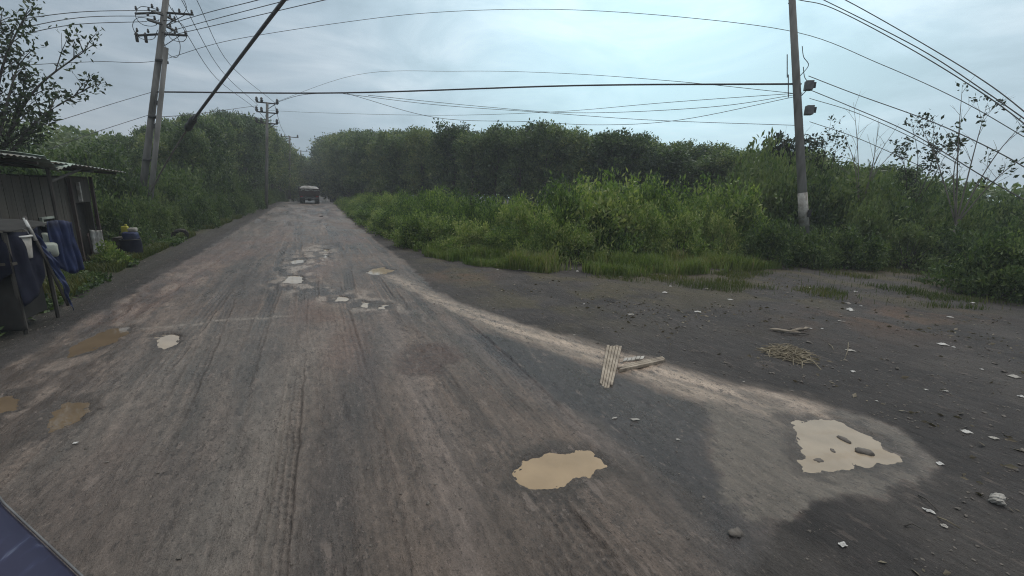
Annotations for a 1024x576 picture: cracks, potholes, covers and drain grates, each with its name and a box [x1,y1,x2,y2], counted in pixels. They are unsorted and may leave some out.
pothole [278,274,308,285]
pothole [39,323,147,364]
pothole [360,266,399,275]
pothole [764,406,946,489]
pothole [141,330,190,353]
pothole [489,438,627,504]
